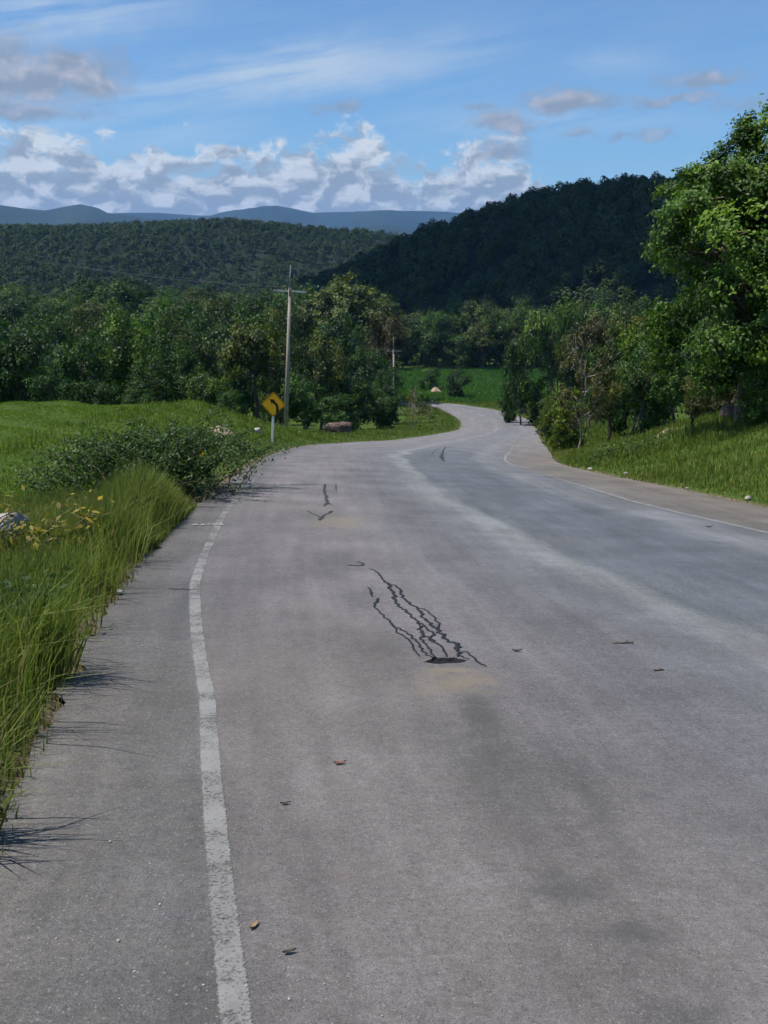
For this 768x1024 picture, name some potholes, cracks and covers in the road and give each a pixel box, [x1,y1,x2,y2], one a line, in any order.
crack [307,484,337,521]
